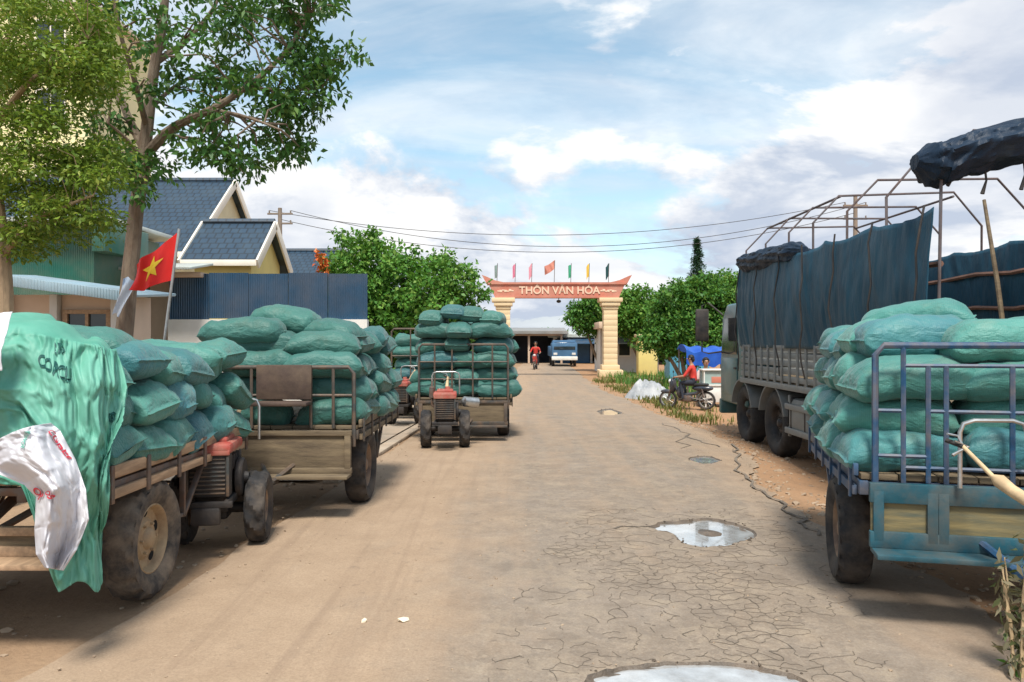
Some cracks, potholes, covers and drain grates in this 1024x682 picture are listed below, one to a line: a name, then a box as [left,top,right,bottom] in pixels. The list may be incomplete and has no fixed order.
pothole [584,659,808,682]
pothole [646,516,757,548]
pothole [688,455,722,464]
crack [488,423,888,682]
